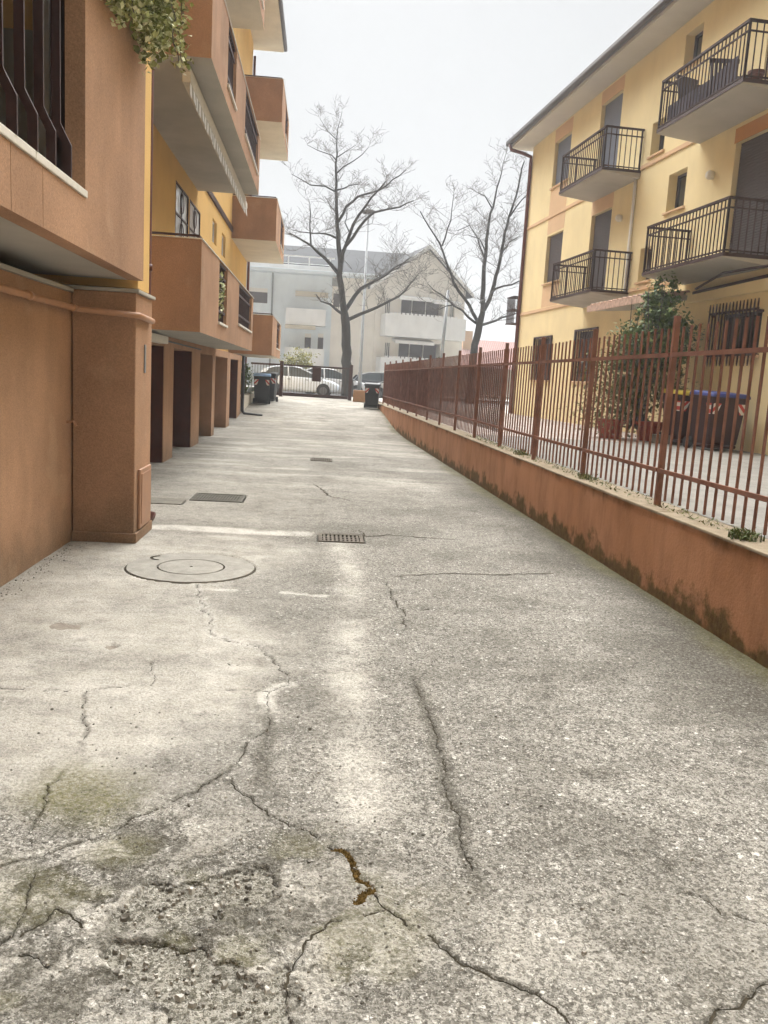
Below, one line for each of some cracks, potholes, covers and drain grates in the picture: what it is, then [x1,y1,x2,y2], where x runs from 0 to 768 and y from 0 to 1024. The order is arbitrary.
crack [231,783,570,1024]
crack [708,984,768,1024]
crack [1,591,289,969]
manhole cover [124,553,256,584]
crack [632,850,768,926]
drain grate [318,533,364,544]
crack [412,679,473,871]
crack [386,573,553,627]
